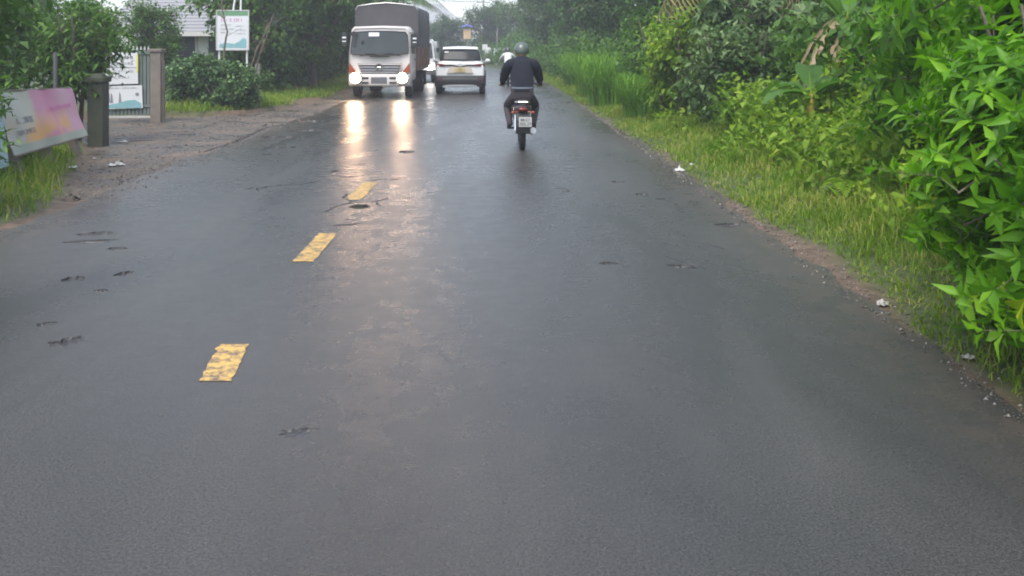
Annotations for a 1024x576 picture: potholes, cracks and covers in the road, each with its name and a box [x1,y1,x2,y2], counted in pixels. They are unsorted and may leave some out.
crack [236,163,401,226]
pothole [48,335,83,347]
pothole [279,427,320,438]
